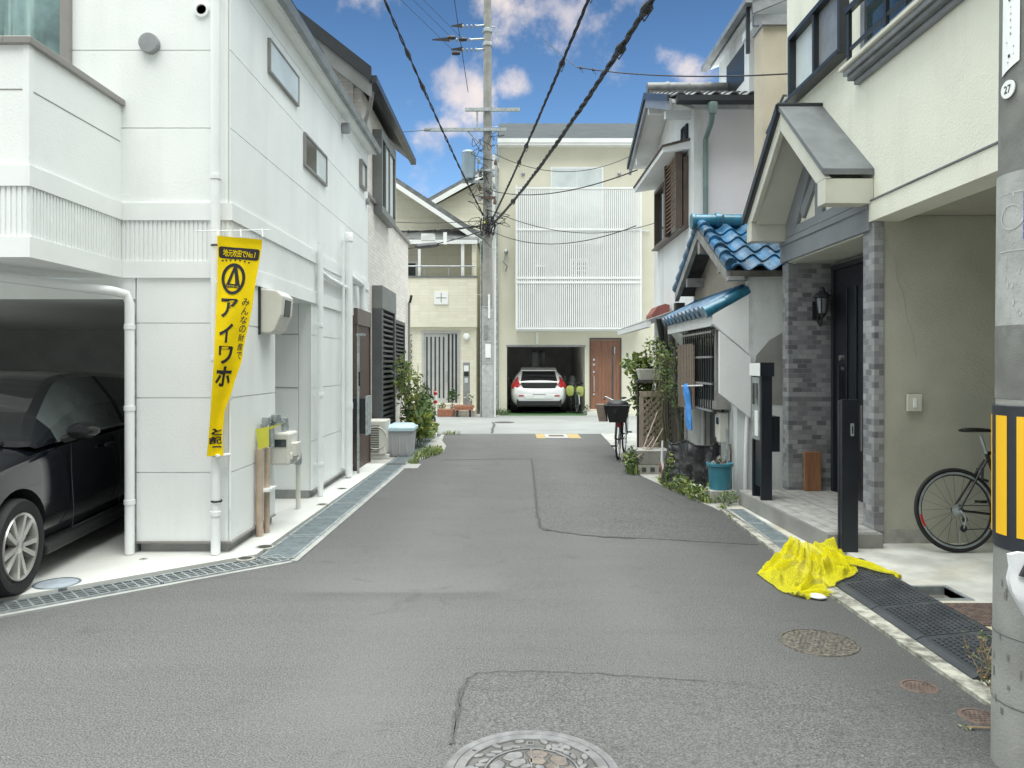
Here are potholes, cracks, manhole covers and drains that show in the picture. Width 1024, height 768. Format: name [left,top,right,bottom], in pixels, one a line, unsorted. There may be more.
drain grate [153,554,290,585]
drain grate [364,472,396,481]
drain grate [724,509,765,523]
drain grate [333,491,373,503]
drain grate [0,576,160,614]
drain grate [258,536,320,560]
drain grate [745,523,789,541]
utility cover [898,679,940,694]
drain grate [289,517,342,536]
drain grate [350,481,385,491]
drain grate [314,503,359,518]
manhole cover [444,730,618,768]
